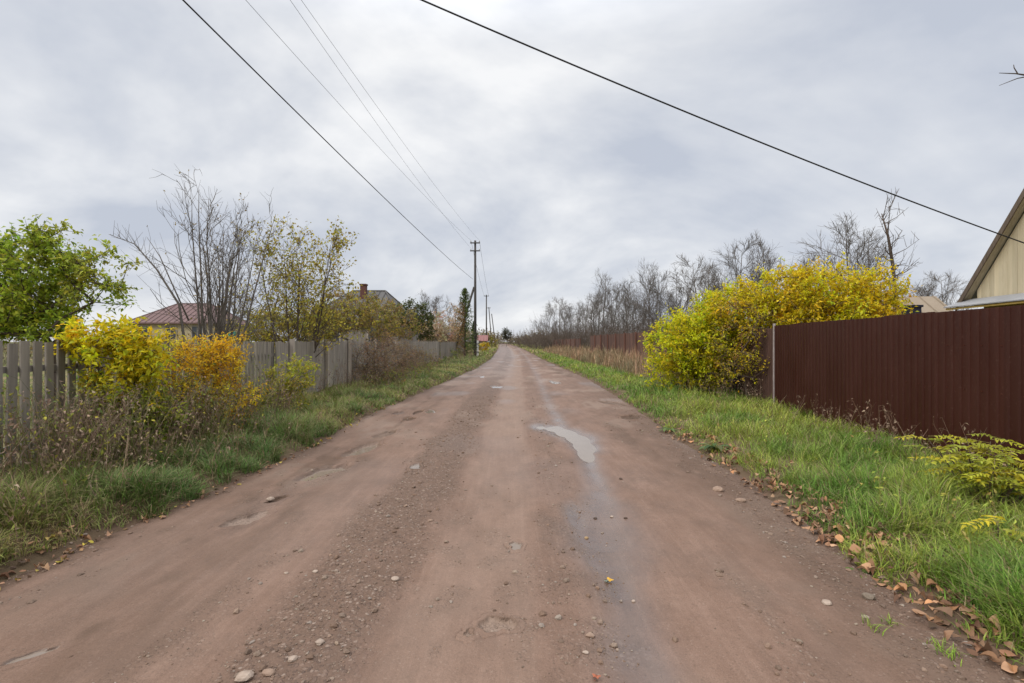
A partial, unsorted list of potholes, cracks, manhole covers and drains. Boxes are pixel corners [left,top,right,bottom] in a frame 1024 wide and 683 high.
pothole [335,439,386,459]
pothole [406,462,425,471]
pothole [504,539,528,553]
pothole [207,508,279,532]
pothole [282,461,361,484]
pothole [468,613,527,639]
pothole [0,636,91,671]
